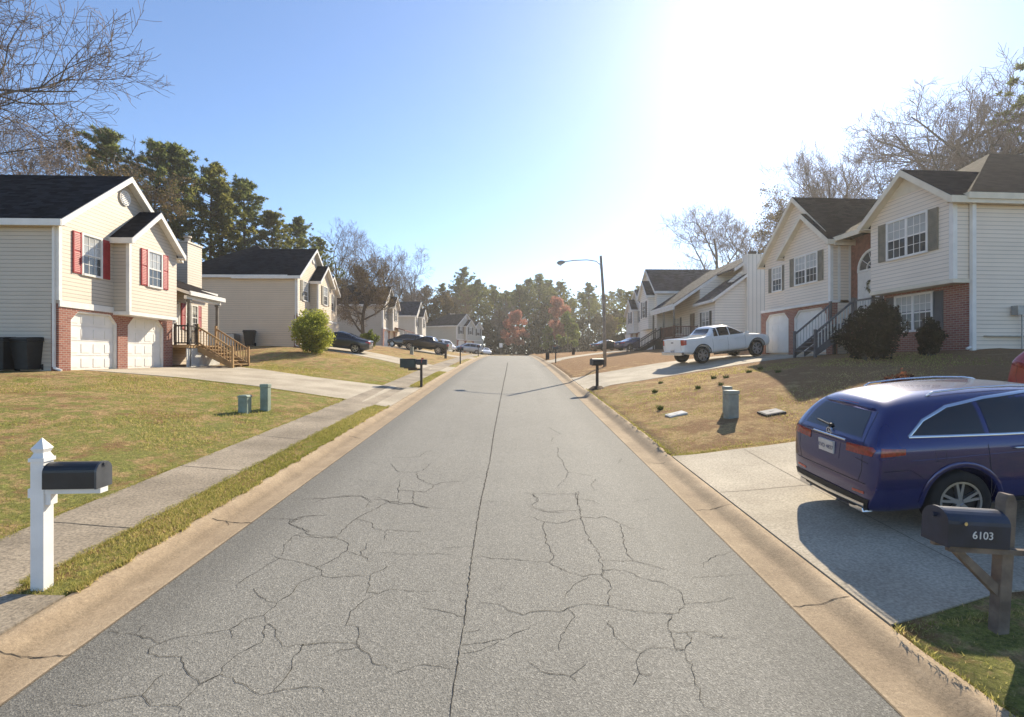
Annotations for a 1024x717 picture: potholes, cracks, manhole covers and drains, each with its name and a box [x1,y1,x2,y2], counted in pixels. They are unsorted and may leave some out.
crack [493,451,736,711]
crack [70,463,457,713]
crack [401,607,528,671]
